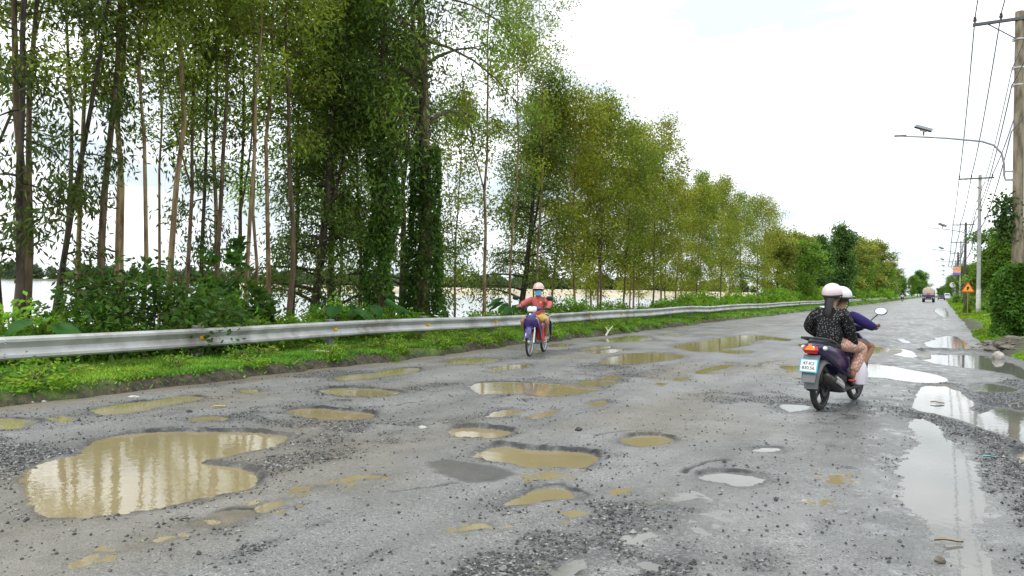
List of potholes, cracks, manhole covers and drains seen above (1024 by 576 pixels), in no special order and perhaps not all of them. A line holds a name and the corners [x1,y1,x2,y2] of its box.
pothole [312,385,407,398]
pothole [492,482,597,508]
pothole [867,363,953,384]
pothole [440,422,520,439]
pothole [903,383,1024,447]
pothole [279,405,383,421]
pothole [9,427,296,521]
pothole [684,467,775,489]
pothole [465,381,605,397]
pothole [593,352,690,365]
pothole [669,334,795,354]
pothole [463,440,606,470]
